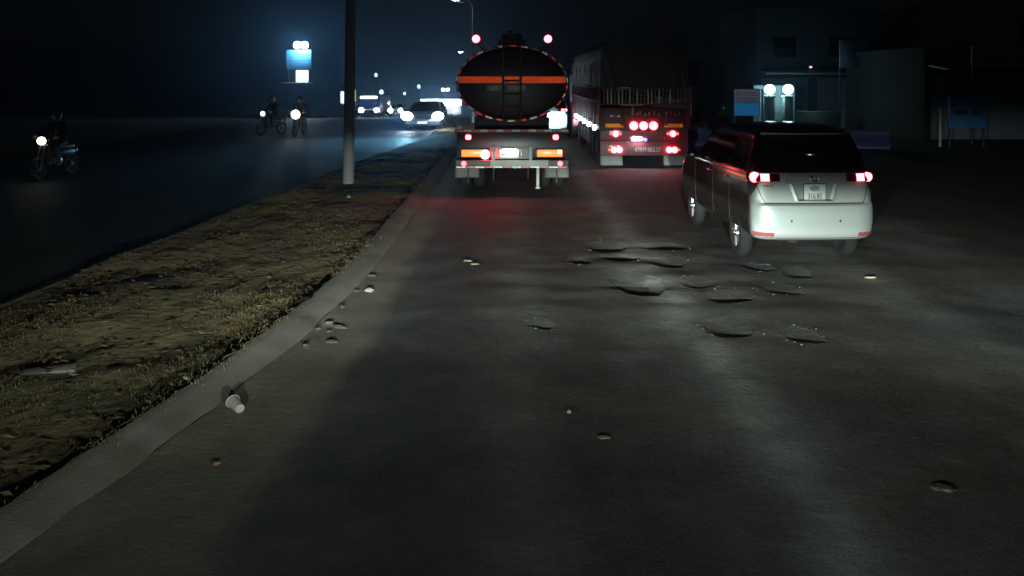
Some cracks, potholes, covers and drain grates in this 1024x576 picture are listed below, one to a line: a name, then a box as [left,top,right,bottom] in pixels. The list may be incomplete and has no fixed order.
pothole [526,317,556,330]
pothole [703,288,756,304]
pothole [607,272,666,296]
pothole [781,266,811,279]
pothole [636,242,691,251]
pothole [569,256,592,266]
pothole [776,324,829,345]
pothole [697,315,765,338]
pothole [680,275,717,289]
pothole [584,239,628,252]
pothole [648,254,689,268]
